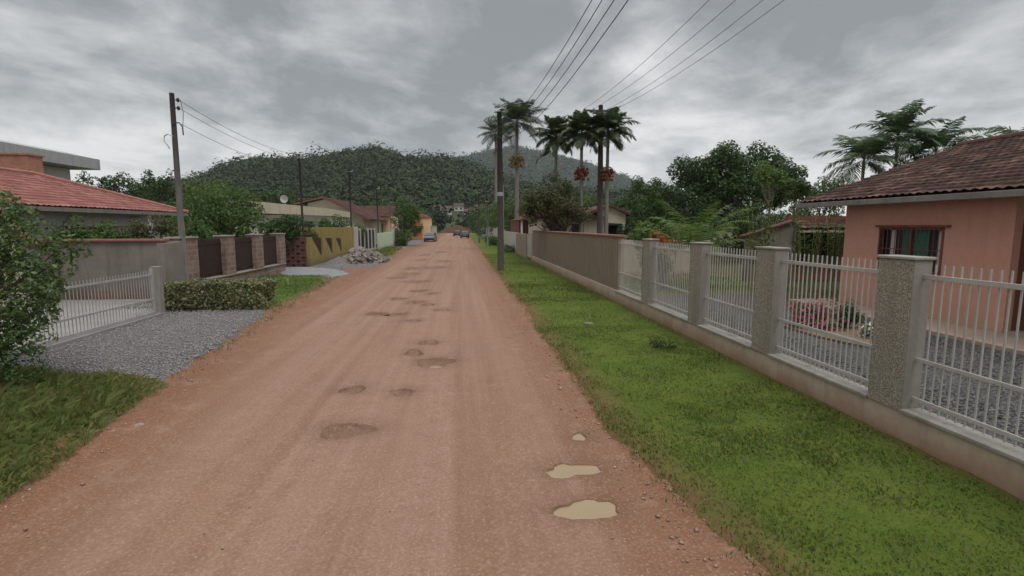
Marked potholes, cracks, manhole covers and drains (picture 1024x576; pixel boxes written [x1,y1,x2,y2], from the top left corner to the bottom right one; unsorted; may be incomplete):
pothole [338,385,366,394]
pothole [543,462,601,479]
pothole [404,349,424,357]
pothole [320,423,379,440]
pothole [550,498,620,520]
pothole [417,357,456,368]
